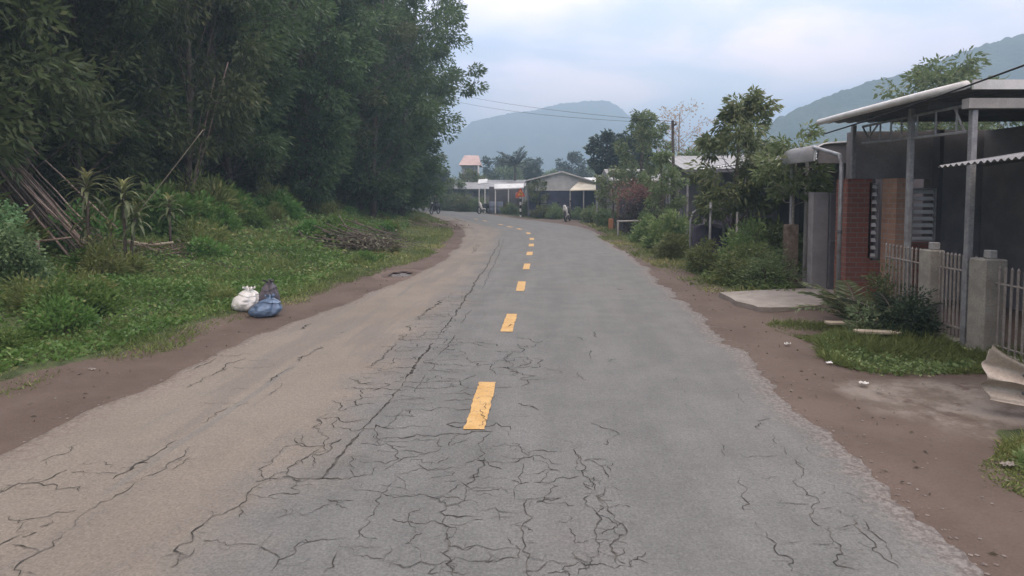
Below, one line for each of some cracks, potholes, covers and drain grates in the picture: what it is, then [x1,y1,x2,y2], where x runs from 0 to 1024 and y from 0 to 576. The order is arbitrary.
crack [720,448,901,573]
crack [162,296,646,576]
pothole [371,269,422,280]
crack [0,441,195,576]
